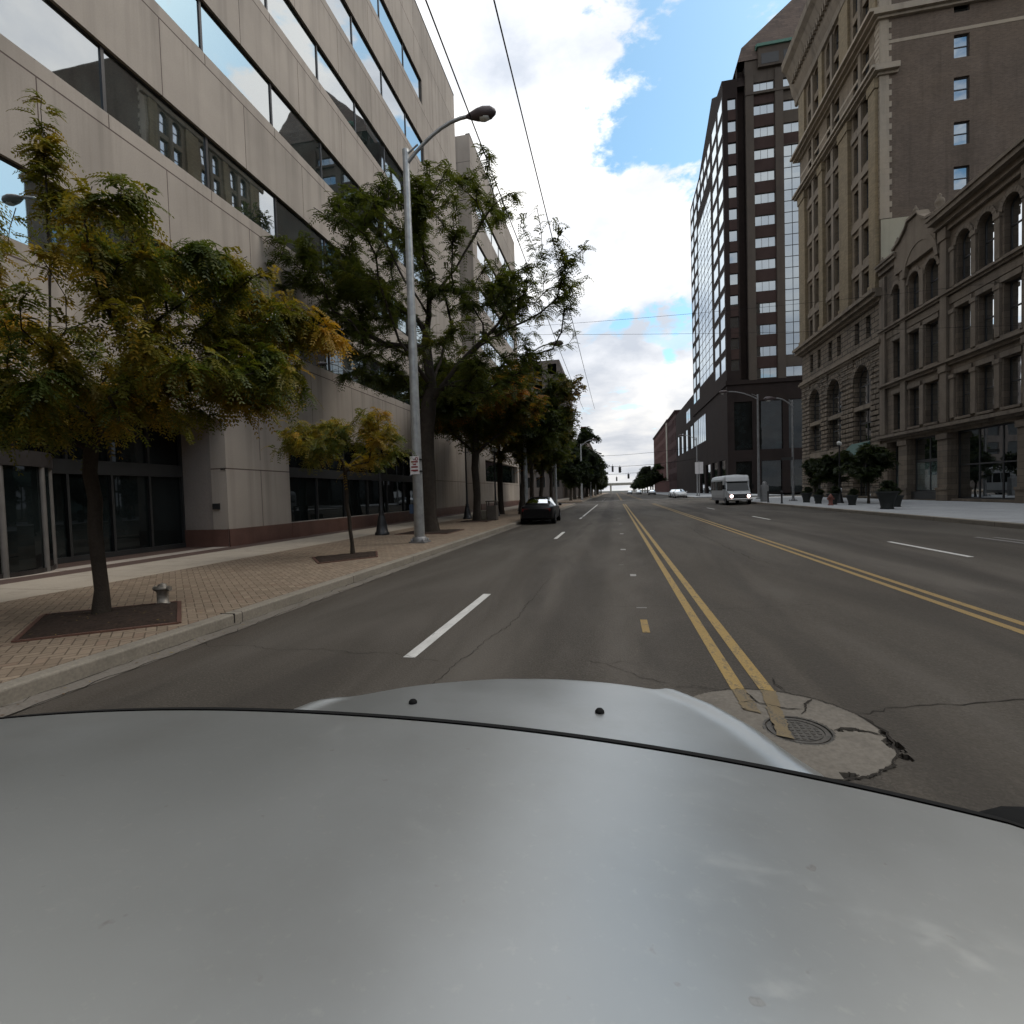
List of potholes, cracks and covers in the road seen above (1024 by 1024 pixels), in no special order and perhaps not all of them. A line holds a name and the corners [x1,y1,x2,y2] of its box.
crack [432,577,551,684]
crack [591,661,1015,779]
